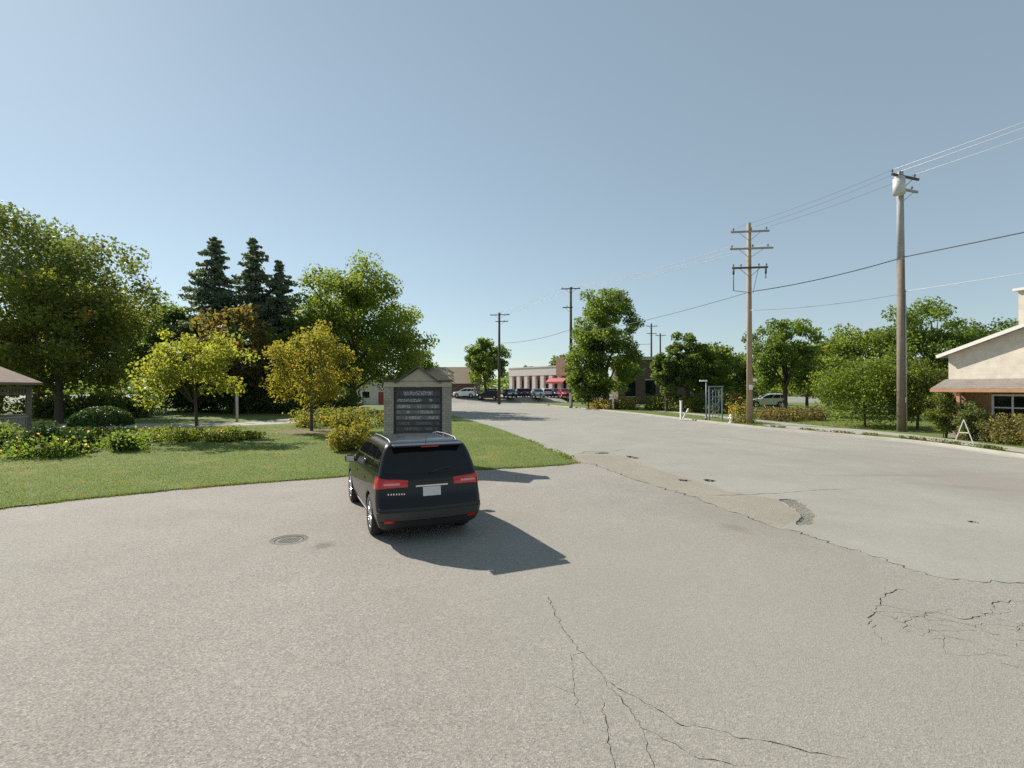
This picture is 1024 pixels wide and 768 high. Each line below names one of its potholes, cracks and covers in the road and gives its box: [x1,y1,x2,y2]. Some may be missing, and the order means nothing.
manhole cover [269,535,308,545]
crack [868,589,1024,667]
crack [548,598,847,768]
pothole [779,499,816,526]
